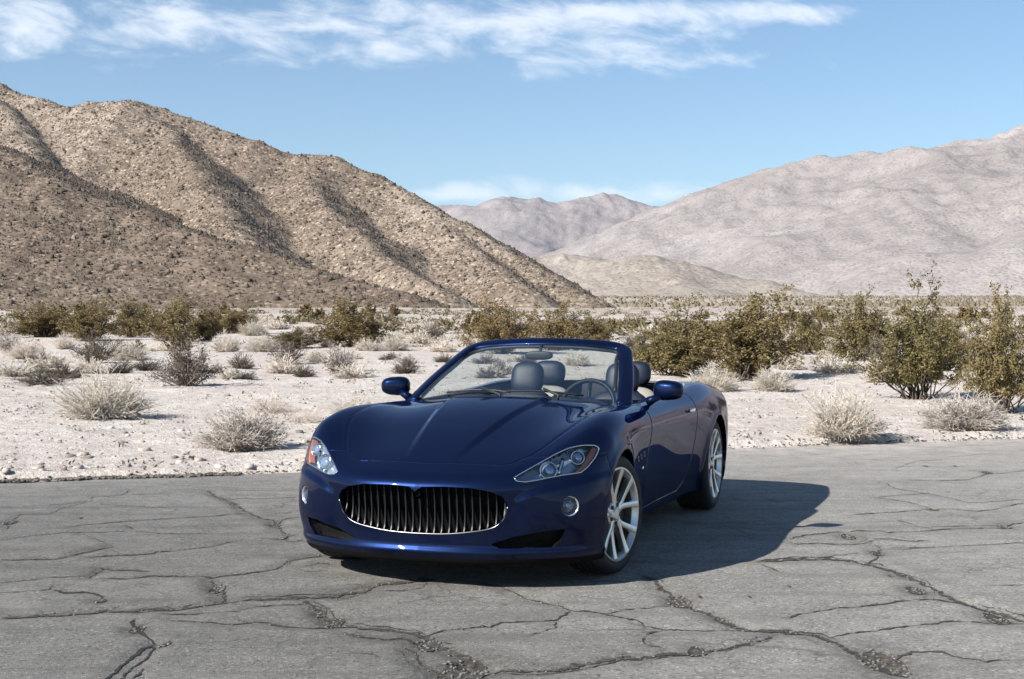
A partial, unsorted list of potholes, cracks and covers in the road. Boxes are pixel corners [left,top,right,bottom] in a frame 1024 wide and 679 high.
pothole [981,612,1012,625]
pothole [905,586,927,595]
pothole [858,648,911,677]
crack [0,460,1024,679]
